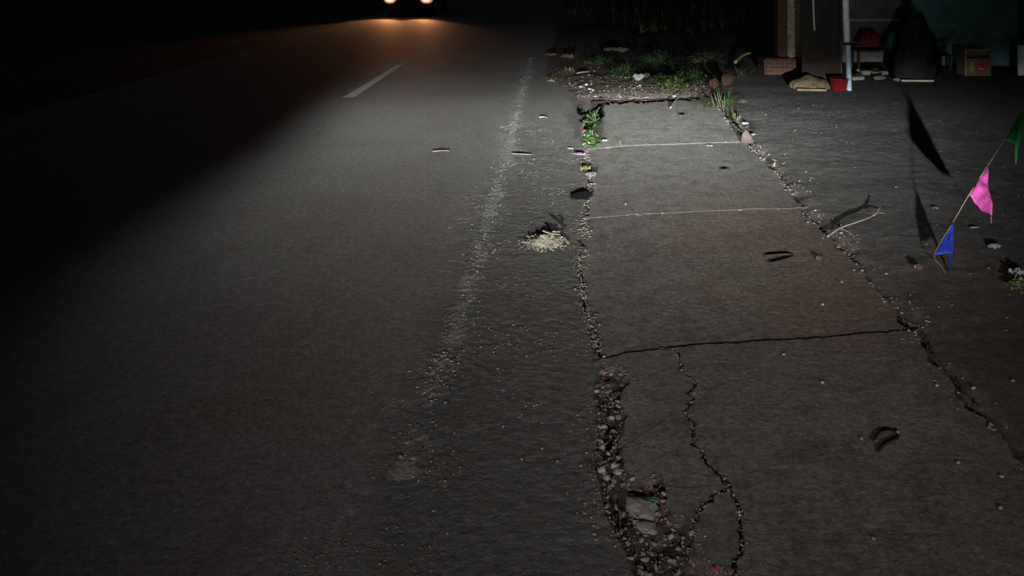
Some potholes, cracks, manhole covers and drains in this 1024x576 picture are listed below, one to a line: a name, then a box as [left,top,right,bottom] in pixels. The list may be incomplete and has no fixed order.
pothole [593,362,735,576]
crack [573,120,980,576]
